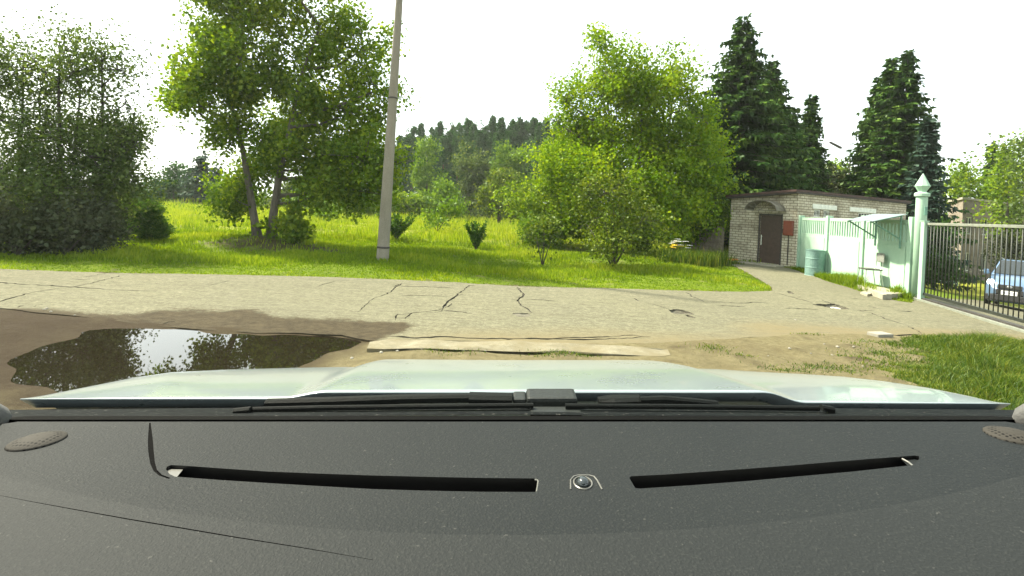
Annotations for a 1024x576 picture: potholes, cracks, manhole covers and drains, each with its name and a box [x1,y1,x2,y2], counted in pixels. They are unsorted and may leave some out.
crack [860,306,922,336]
crack [358,283,473,320]
crack [0,273,138,307]
